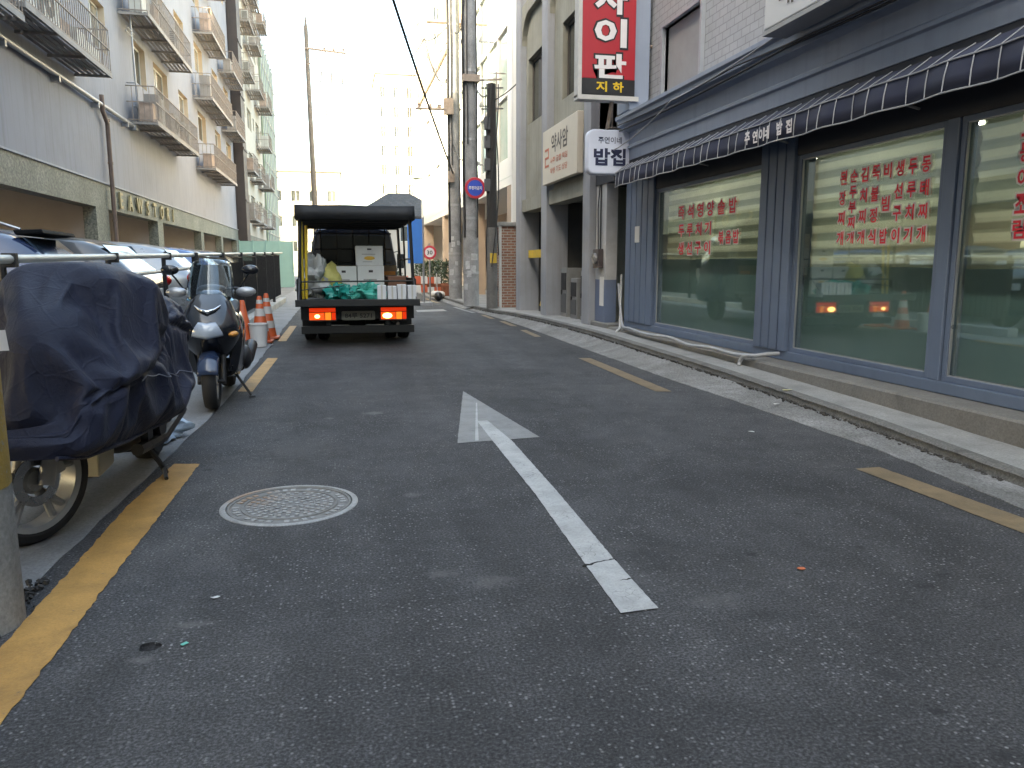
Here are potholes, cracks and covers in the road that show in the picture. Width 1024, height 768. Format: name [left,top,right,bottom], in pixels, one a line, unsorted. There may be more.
manhole cover [219,485,358,527]
pothole [139,642,162,652]
